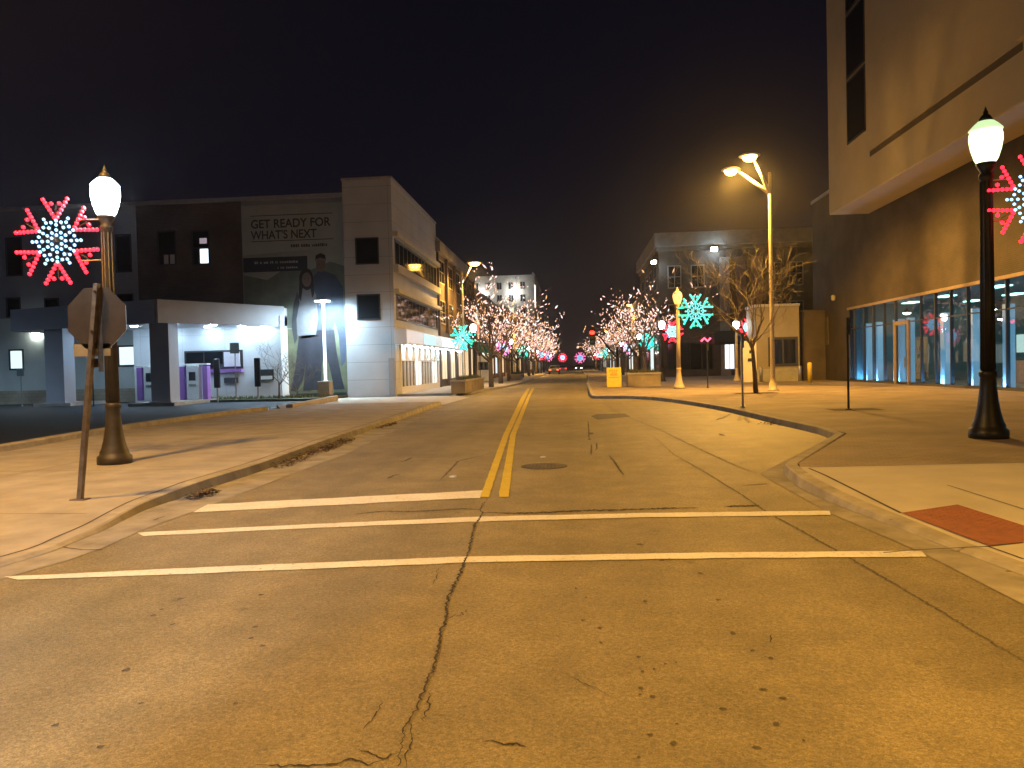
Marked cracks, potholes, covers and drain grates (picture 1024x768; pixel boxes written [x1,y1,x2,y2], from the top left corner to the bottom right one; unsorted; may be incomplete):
crack [587,422,624,474]
crack [256,500,699,768]
